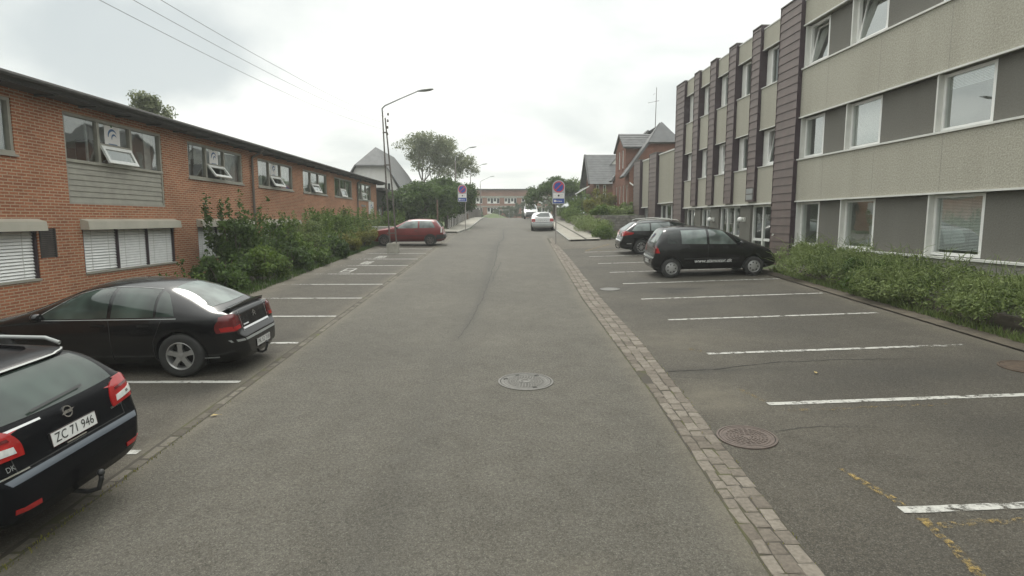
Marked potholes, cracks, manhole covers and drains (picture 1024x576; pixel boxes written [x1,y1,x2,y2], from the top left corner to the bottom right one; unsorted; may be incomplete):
manhole cover [997,360,1024,373]
crack [458,230,504,338]
manhole cover [716,425,778,450]
crack [681,358,915,378]
manhole cover [498,373,553,391]
